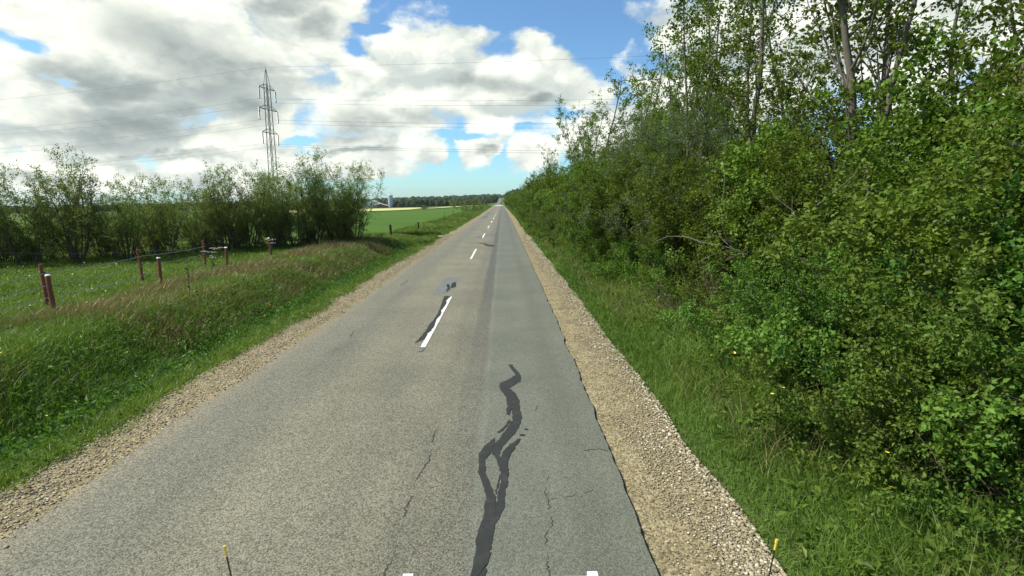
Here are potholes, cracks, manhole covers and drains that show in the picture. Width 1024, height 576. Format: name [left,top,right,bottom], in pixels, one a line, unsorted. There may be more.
crack [382,430,436,576]
crack [544,474,592,576]
